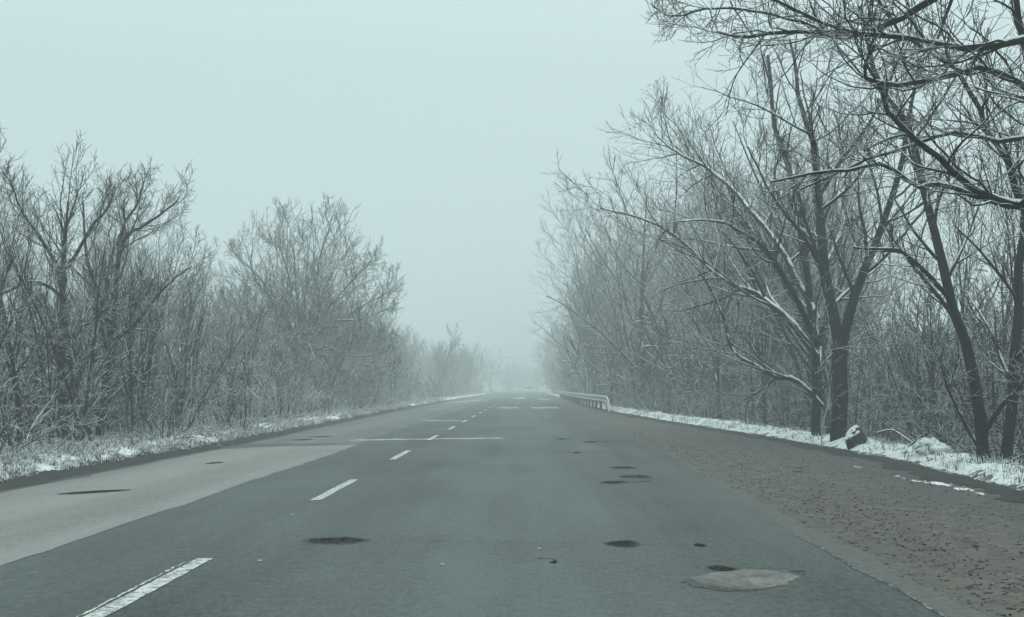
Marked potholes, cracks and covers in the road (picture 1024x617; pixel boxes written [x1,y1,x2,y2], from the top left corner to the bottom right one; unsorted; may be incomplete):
pothole [602,540,642,548]
pothole [301,536,372,545]
